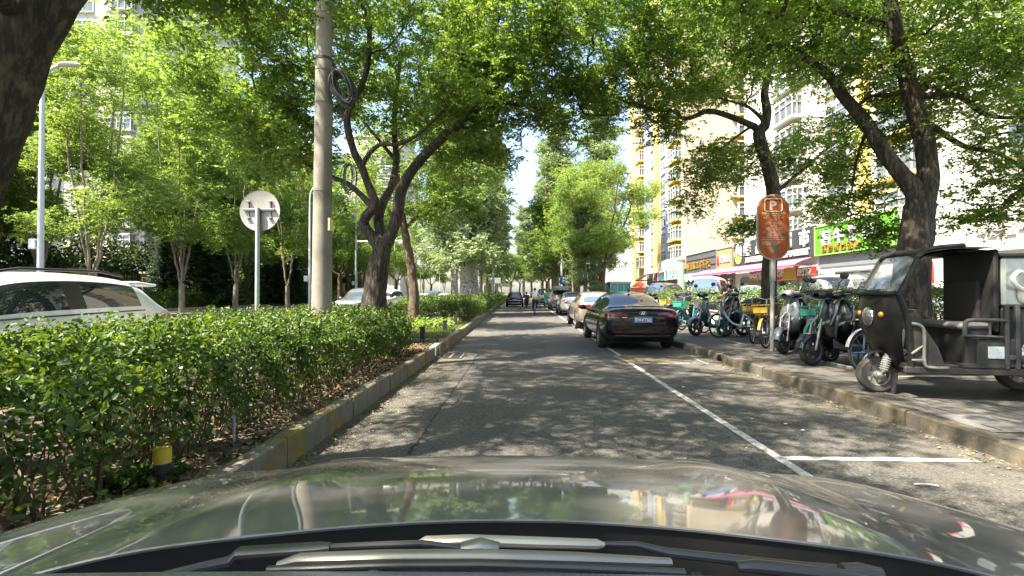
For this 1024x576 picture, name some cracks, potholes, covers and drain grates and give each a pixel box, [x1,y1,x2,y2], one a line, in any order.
crack [407,344,486,454]
